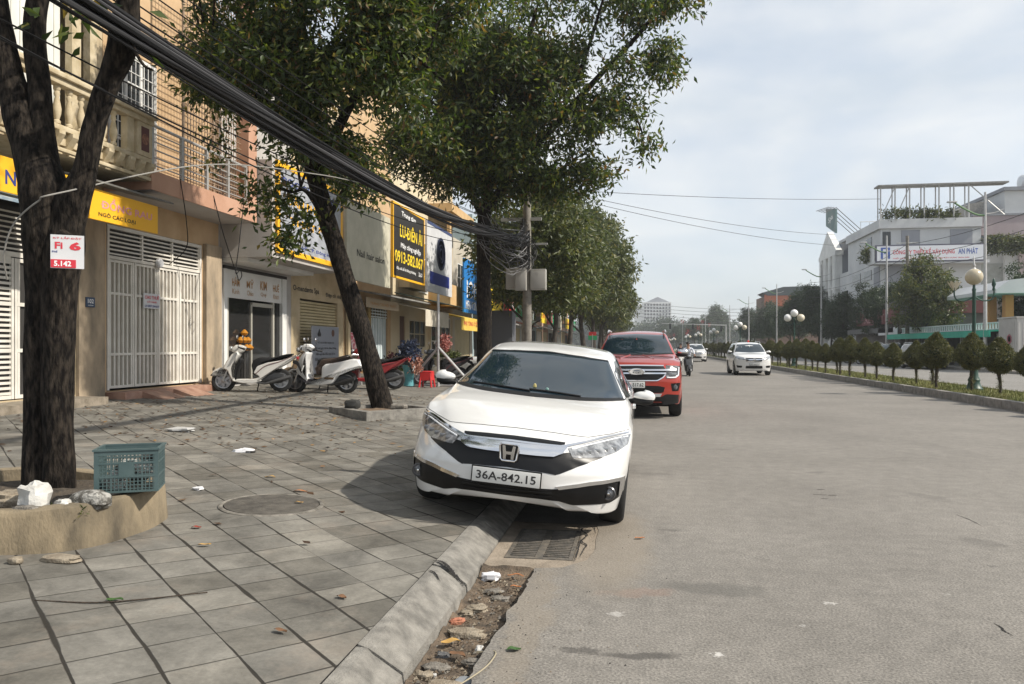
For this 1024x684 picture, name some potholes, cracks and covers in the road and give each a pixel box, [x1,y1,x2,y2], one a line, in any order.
pothole [405,563,534,684]
drain grate [504,528,581,561]
manhole cover [218,494,324,517]
